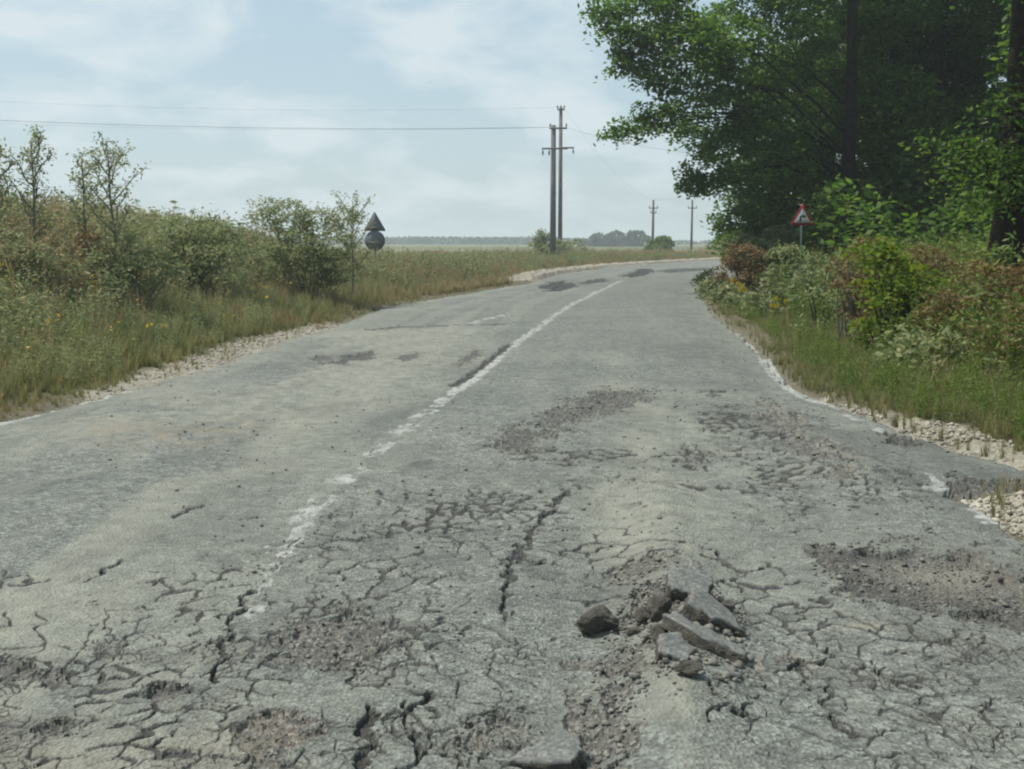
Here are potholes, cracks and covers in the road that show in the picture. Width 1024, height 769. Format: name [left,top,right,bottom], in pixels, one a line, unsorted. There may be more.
pothole [123,679,197,705]
crack [0,389,1024,769]
pothole [229,707,329,769]
